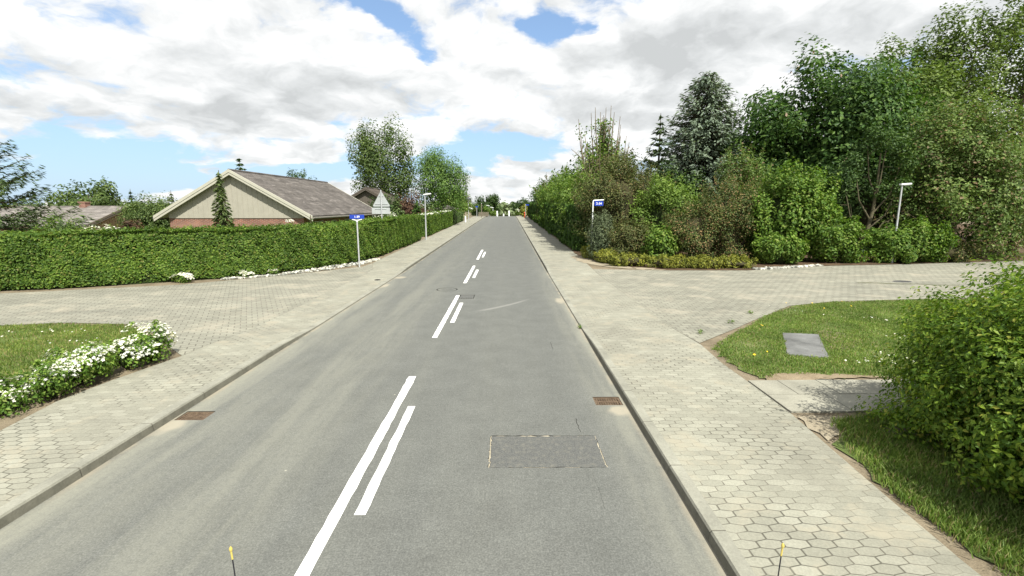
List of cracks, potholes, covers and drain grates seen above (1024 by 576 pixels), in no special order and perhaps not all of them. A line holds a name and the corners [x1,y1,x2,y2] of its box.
crack [487,419,608,506]
drain grate [593,397,623,405]
drain grate [176,412,214,420]
